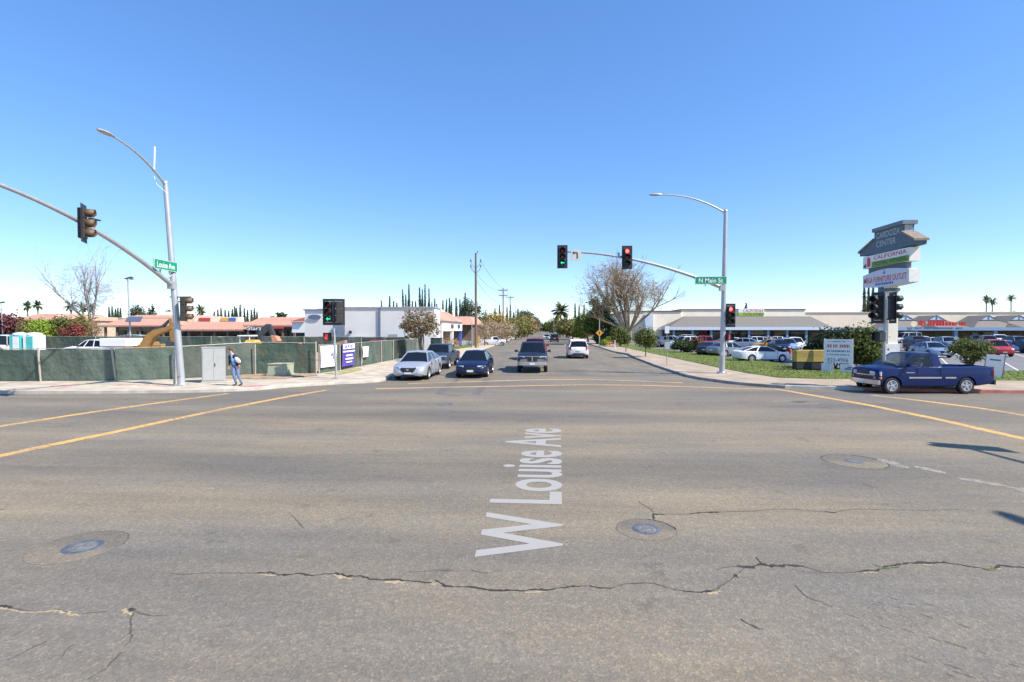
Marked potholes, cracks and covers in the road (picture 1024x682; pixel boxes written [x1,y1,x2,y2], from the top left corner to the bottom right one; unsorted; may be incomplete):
manhole cover [23,530,130,565]
crack [638,501,959,519]
crack [170,557,1024,607]
crack [0,605,109,616]
manhole cover [616,519,677,541]
manhole cover [820,454,890,469]
crack [88,610,162,679]
